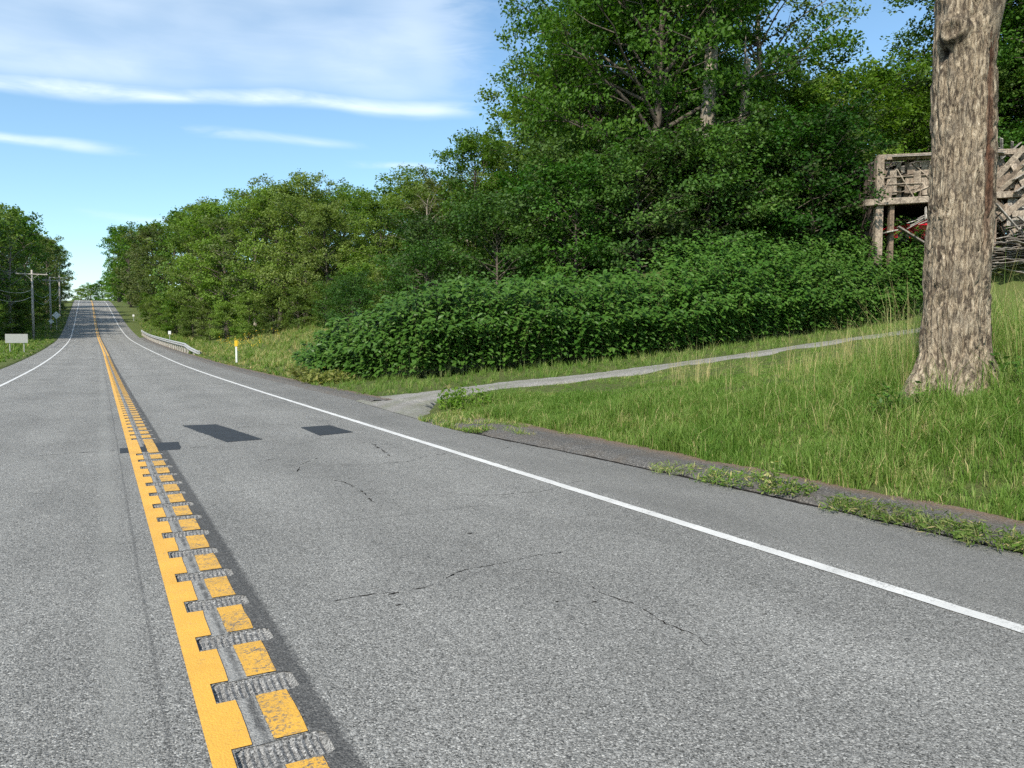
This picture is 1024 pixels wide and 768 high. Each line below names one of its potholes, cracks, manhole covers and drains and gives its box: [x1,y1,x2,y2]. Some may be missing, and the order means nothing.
crack [326,551,767,645]
